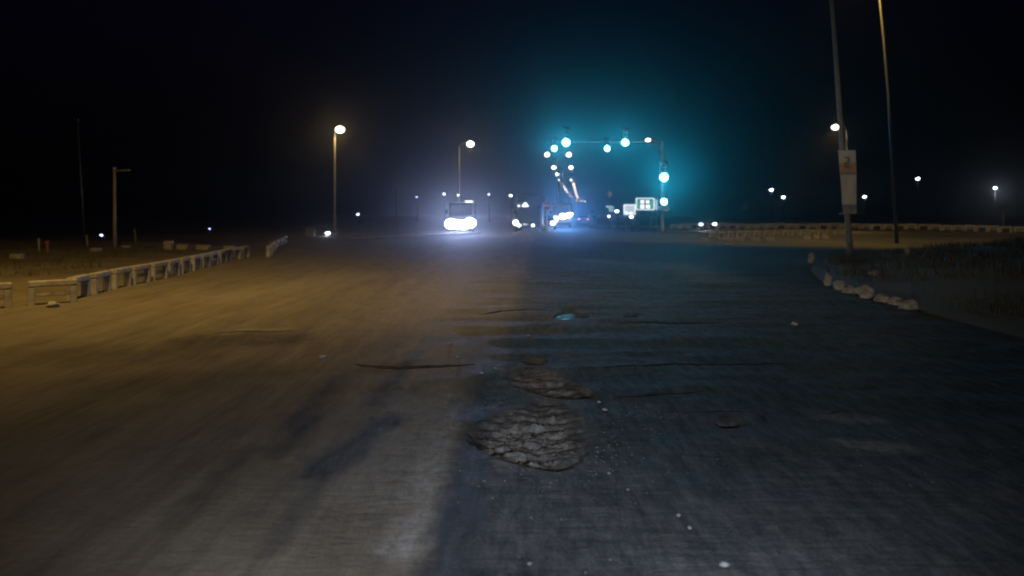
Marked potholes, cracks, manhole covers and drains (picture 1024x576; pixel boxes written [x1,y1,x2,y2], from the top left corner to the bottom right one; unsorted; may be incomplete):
pothole [715,415,749,429]
pothole [466,400,590,472]
pothole [520,355,548,366]
pothole [553,307,590,320]
pothole [504,367,594,400]
